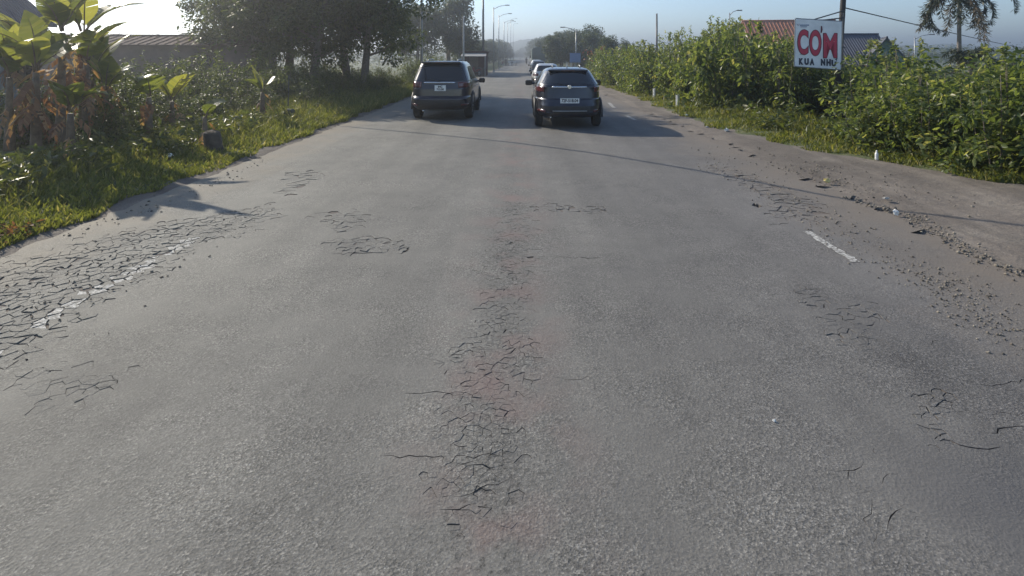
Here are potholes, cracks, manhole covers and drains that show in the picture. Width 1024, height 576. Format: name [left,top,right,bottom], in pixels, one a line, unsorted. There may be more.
crack [911,388,1024,452]
crack [794,283,890,350]
crack [0,169,611,545]
crack [707,165,830,227]
